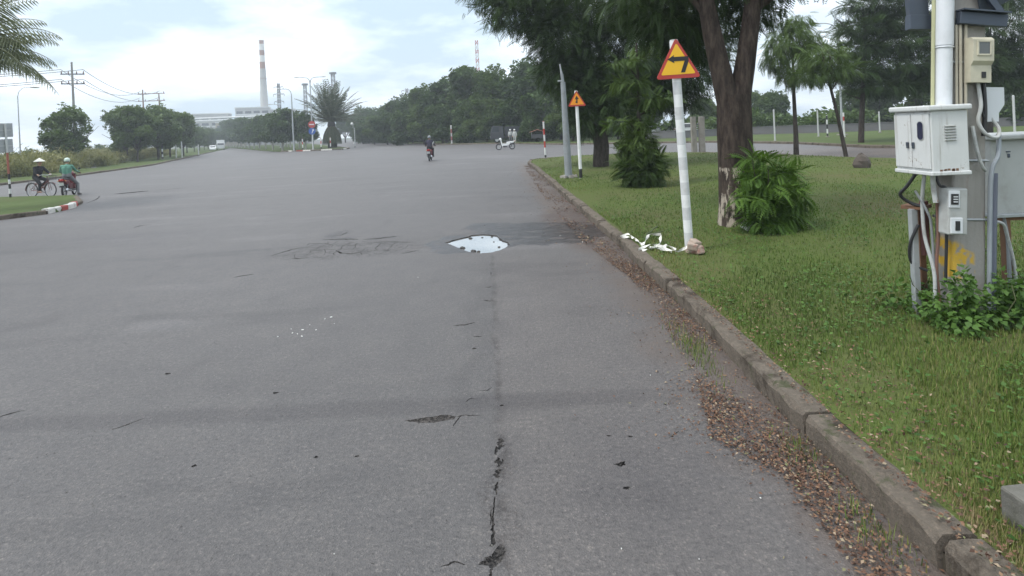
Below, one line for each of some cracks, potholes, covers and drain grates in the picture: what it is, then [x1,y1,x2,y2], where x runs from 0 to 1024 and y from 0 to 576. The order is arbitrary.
crack [275,232,417,259]
crack [453,287,492,426]
crack [441,439,507,576]
pothole [446,234,510,253]
